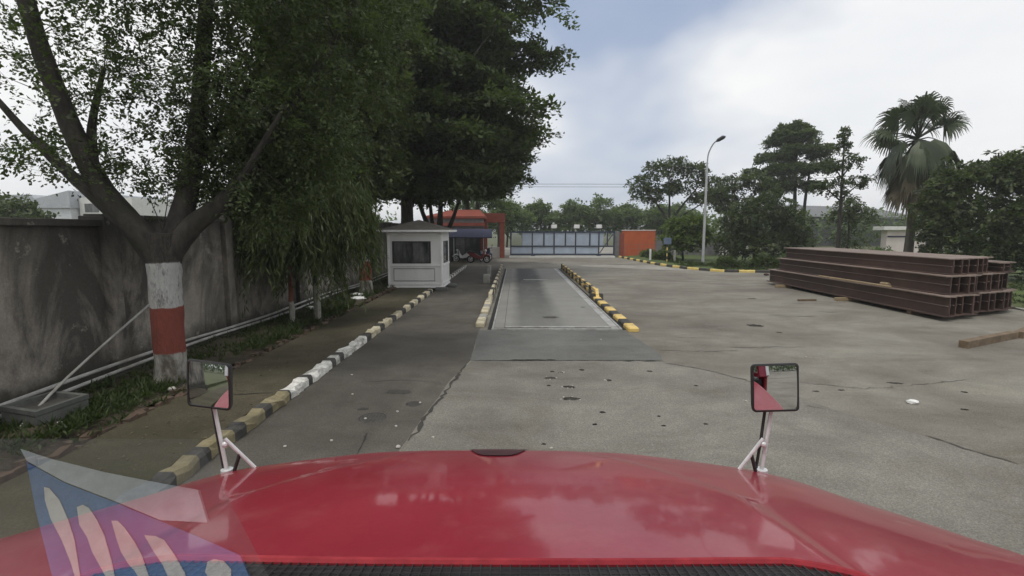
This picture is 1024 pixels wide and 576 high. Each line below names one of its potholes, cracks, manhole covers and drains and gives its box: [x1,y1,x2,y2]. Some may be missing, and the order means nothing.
crack [364,365,466,441]
manhole cover [358,412,387,423]
crack [929,436,1018,464]
crack [623,325,777,382]
